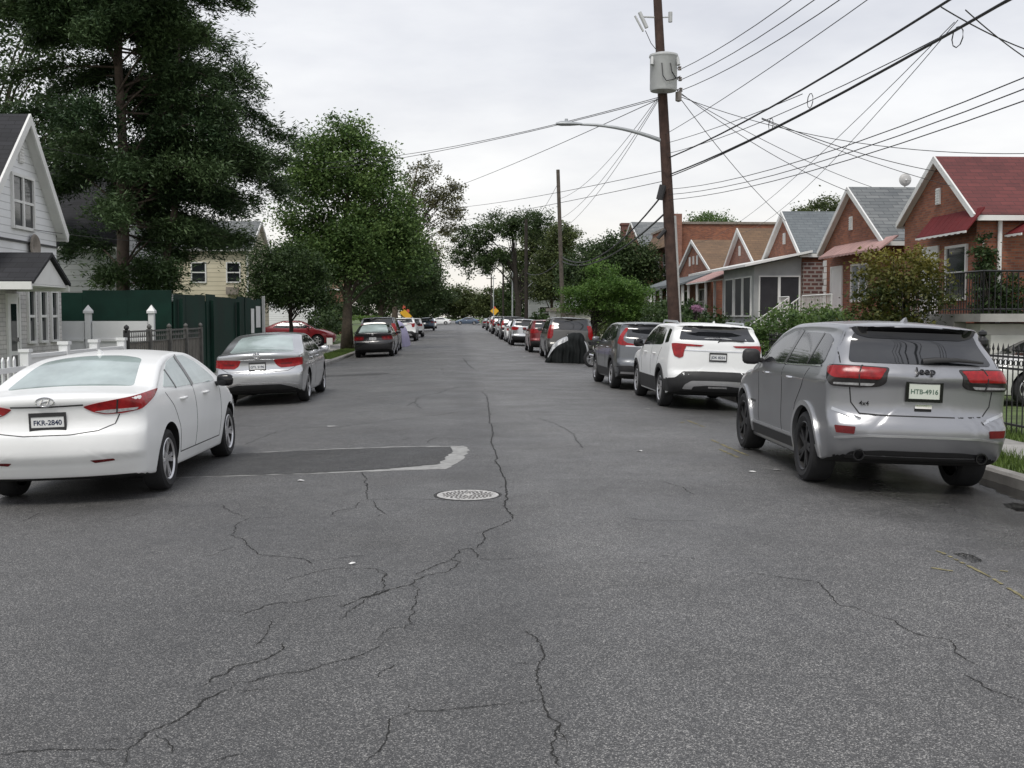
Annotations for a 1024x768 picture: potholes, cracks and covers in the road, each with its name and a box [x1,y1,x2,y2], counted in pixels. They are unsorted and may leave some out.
manhole cover [434,489,502,501]
crack [330,472,499,516]
crack [9,520,511,766]
crack [201,506,386,581]
crack [756,573,1024,703]
